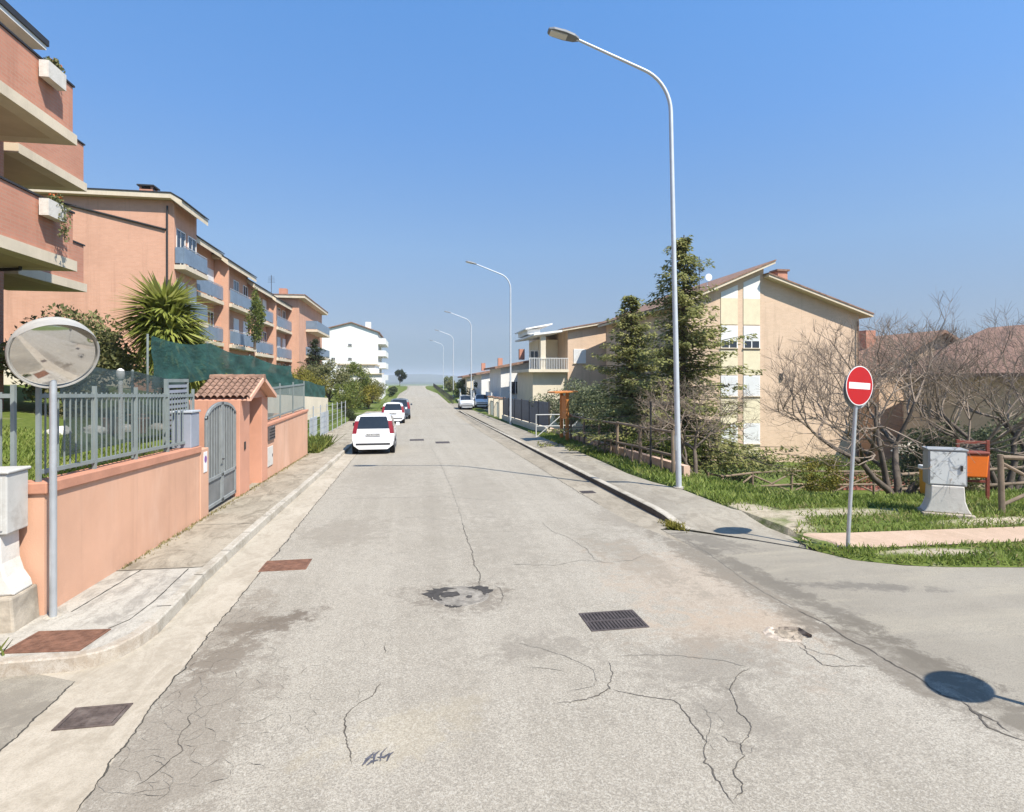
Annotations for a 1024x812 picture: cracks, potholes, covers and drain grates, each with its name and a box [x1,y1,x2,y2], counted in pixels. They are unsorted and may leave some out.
crack [344,682,382,763]
crack [516,642,755,801]
crack [97,601,331,802]
manhole cover [51,703,133,731]
manhole cover [0,629,111,654]
drain grate [579,609,649,632]
pothole [763,626,812,642]
crack [798,642,876,668]
manhole cover [258,559,312,572]
crack [351,451,504,601]
